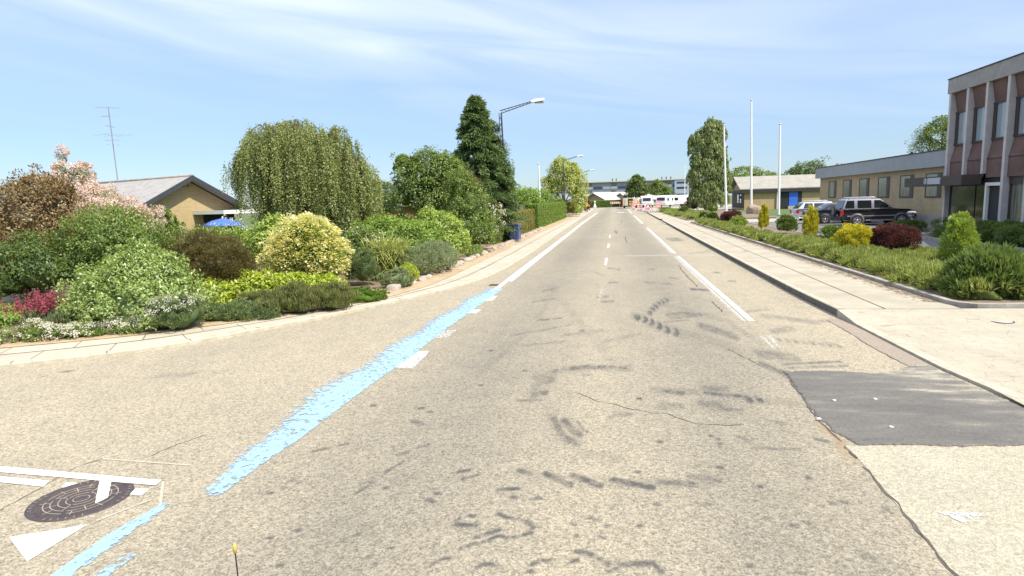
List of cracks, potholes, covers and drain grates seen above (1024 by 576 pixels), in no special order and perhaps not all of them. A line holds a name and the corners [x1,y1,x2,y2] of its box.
manhole cover [24,479,134,522]
